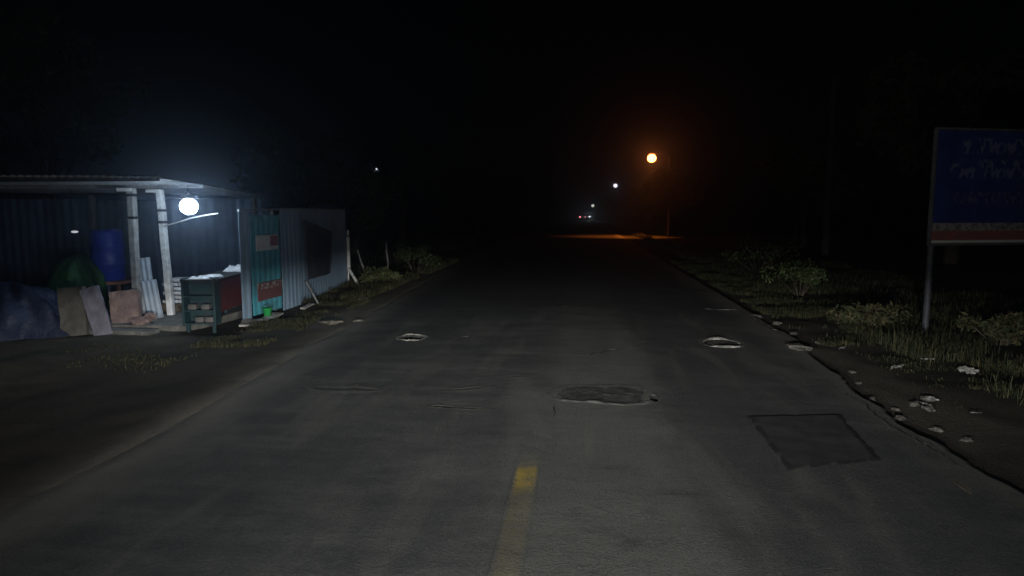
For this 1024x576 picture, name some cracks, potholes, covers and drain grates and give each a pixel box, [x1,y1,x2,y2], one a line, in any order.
crack [842,392,973,472]
pothole [395,333,429,341]
crack [576,341,653,356]
pothole [547,384,653,406]
